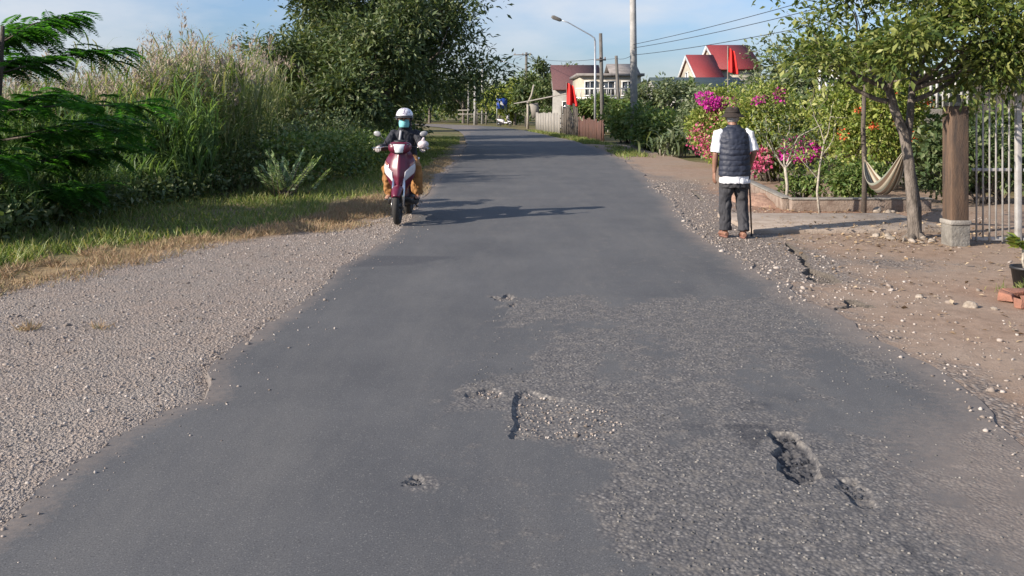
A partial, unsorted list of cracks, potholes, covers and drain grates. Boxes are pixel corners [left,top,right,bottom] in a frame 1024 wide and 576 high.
pothole [400,475,429,488]
pothole [768,431,823,486]
pothole [834,477,881,509]
